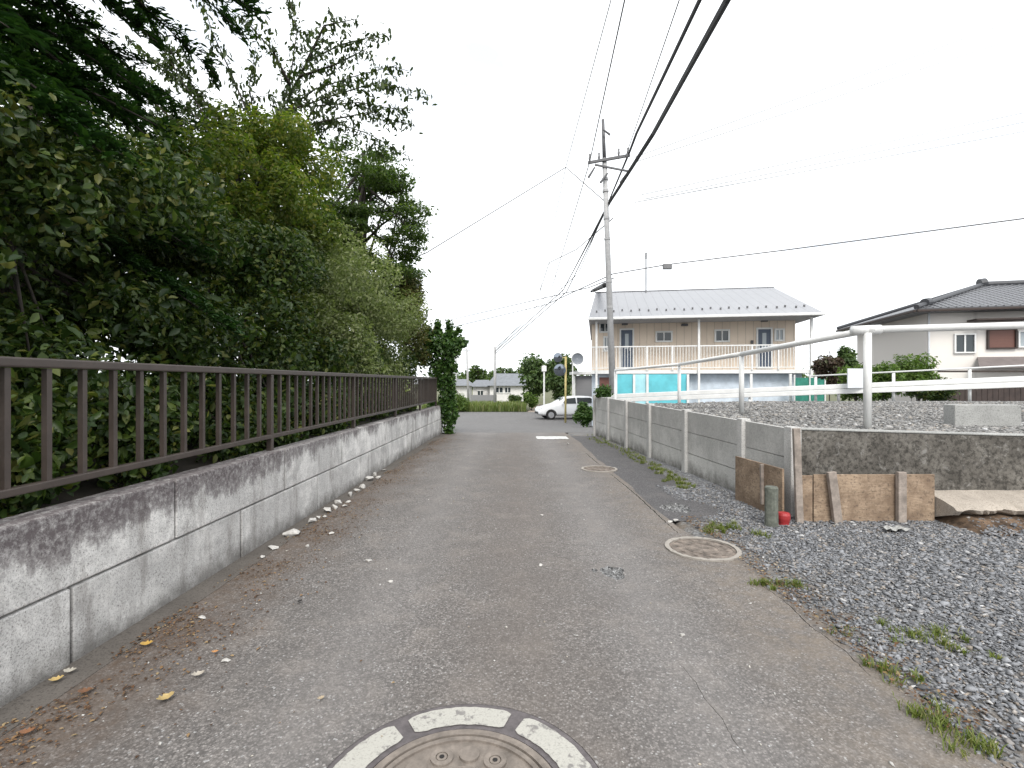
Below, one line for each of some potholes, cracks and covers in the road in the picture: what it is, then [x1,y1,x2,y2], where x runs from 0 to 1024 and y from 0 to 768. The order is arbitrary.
manhole cover [581,465,617,473]
manhole cover [327,704,598,768]
crack [677,661,748,759]
pothole [600,566,624,580]
manhole cover [665,536,742,562]
